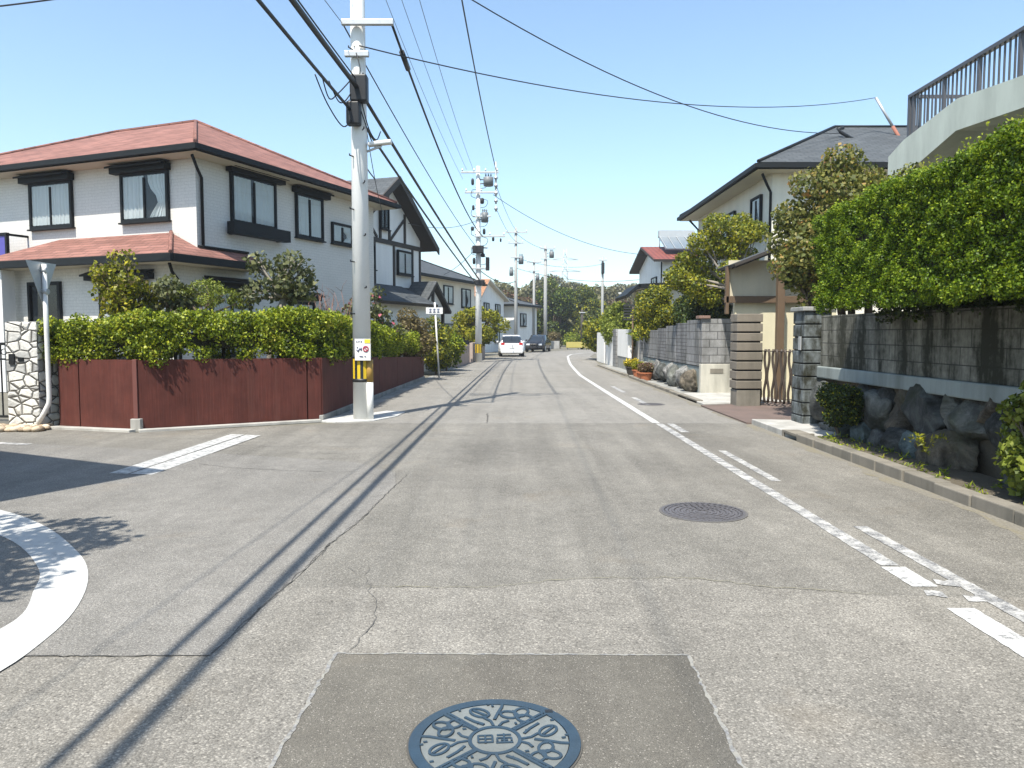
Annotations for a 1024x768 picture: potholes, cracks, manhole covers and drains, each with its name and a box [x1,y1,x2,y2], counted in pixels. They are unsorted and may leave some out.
manhole cover [659,502,748,523]
manhole cover [406,699,583,768]
